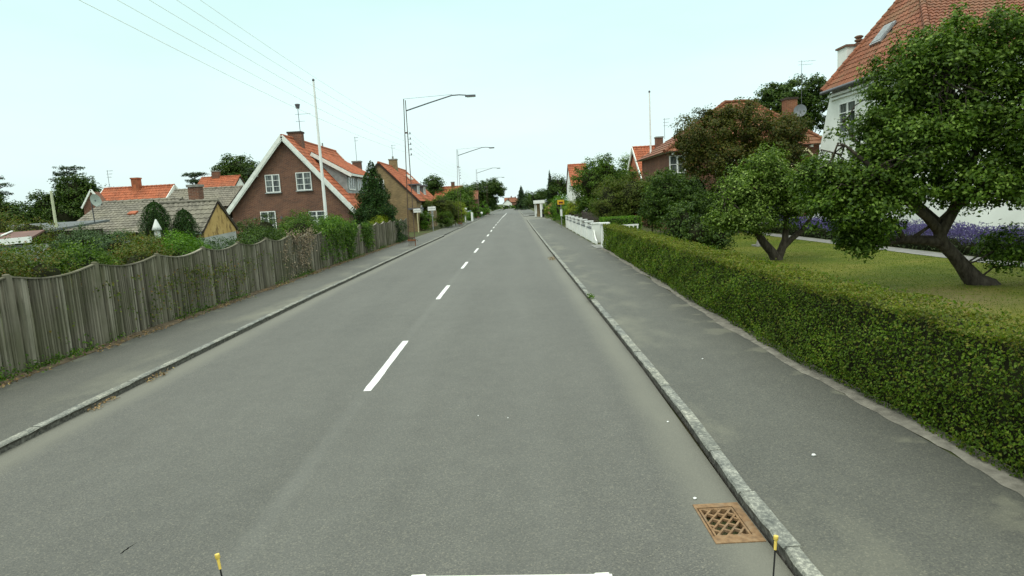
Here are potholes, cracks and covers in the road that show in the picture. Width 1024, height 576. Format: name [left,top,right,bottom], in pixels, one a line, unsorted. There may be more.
drain grate [692,502,766,544]
